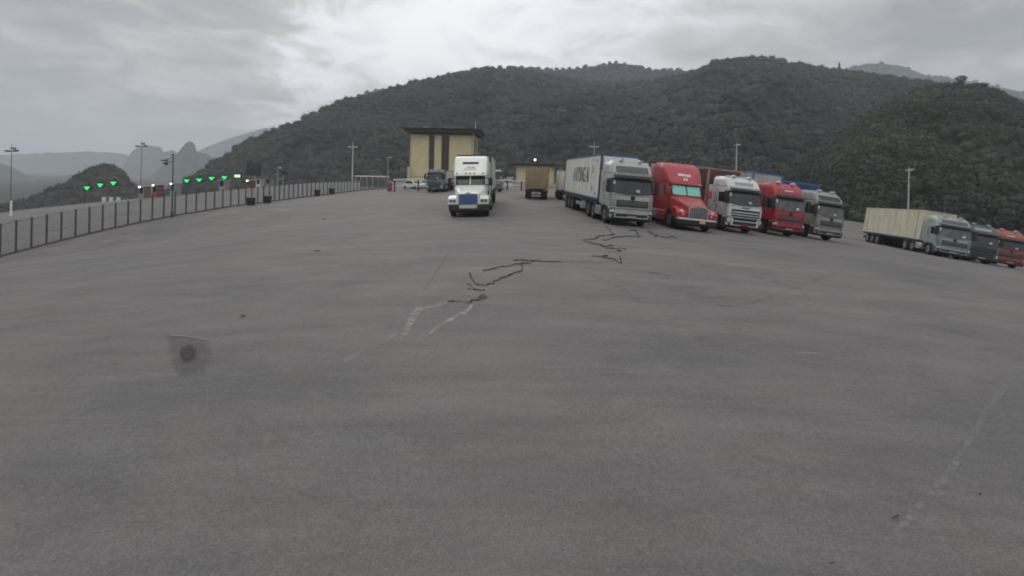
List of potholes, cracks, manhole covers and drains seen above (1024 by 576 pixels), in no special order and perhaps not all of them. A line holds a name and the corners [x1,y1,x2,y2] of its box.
crack [449,259,562,303]
crack [584,225,678,263]
